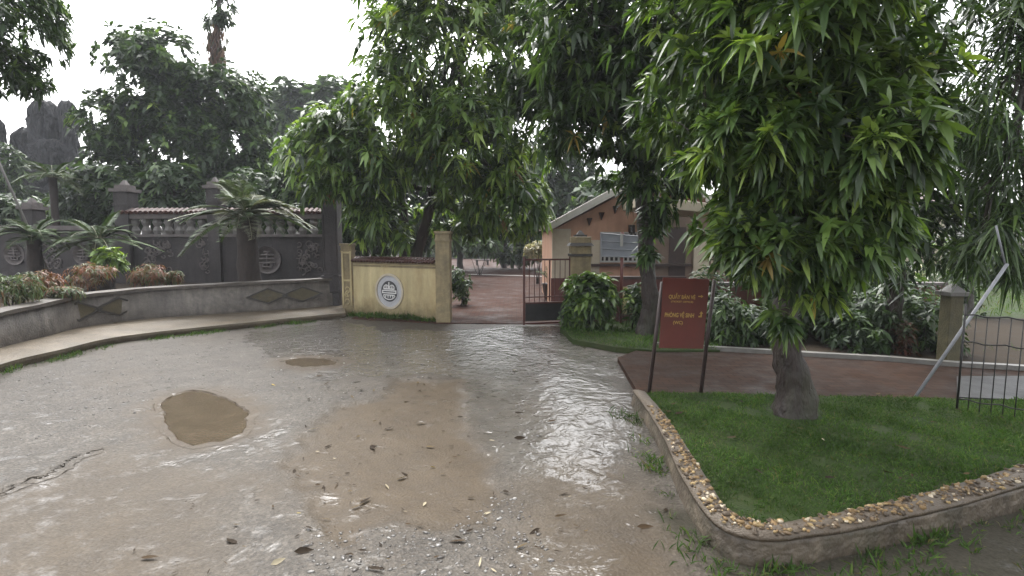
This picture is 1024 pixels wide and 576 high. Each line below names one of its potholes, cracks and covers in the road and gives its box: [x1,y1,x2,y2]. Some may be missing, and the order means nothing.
pothole [278,356,345,368]
crack [0,447,104,496]
pothole [151,388,260,449]
